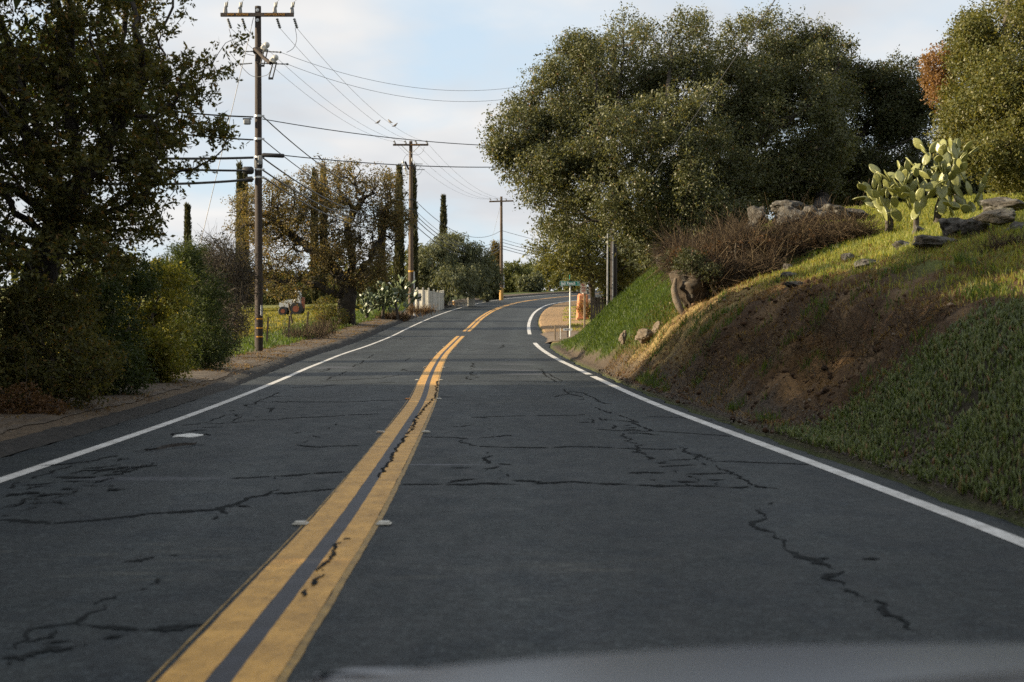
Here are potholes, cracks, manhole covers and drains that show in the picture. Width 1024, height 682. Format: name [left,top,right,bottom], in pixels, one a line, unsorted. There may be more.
crack [0,455,347,524]
crack [1,554,203,664]
crack [170,338,917,631]
